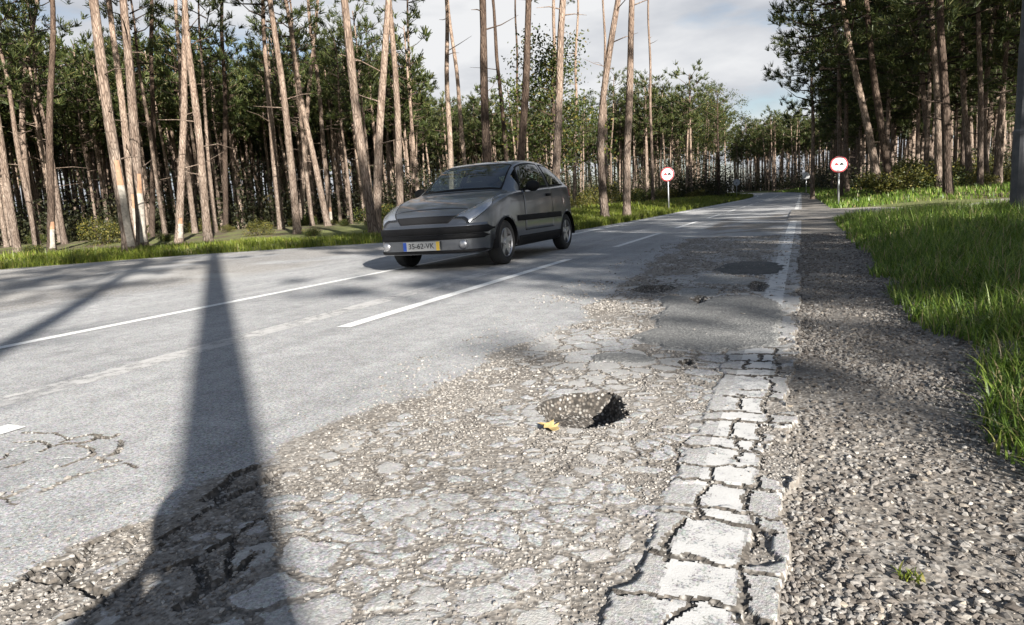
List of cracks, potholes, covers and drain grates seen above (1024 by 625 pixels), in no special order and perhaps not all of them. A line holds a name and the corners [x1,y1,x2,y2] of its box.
crack [0,256,799,625]
pothole [747,281,770,292]
pothole [631,284,676,294]
pothole [534,391,629,429]
